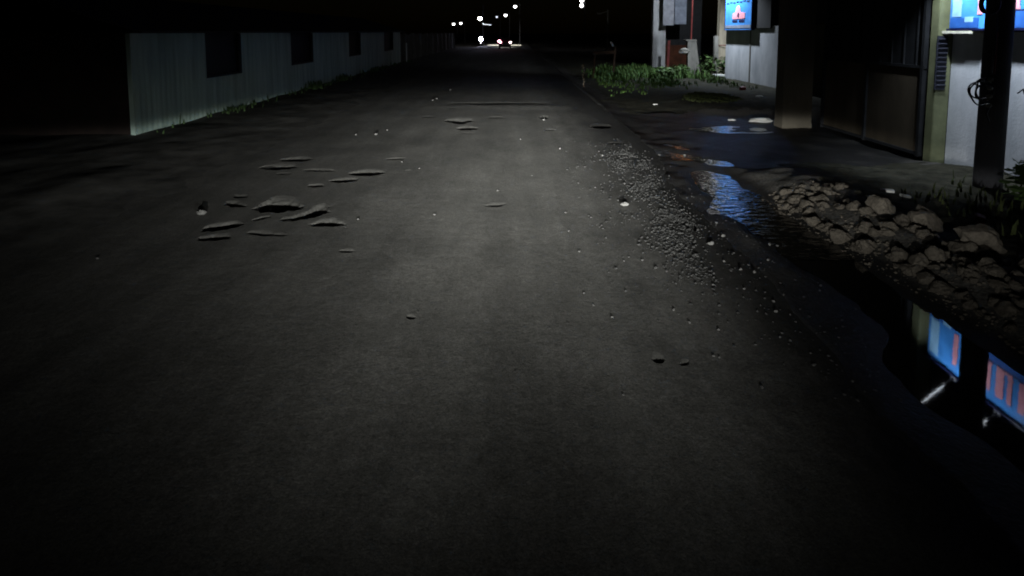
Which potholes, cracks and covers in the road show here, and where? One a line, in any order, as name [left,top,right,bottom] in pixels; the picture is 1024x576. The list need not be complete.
pothole [651,350,666,364]
pothole [246,229,288,237]
pothole [307,217,347,227]
pothole [197,233,233,241]
pothole [348,168,386,176]
pothole [251,195,306,213]
pothole [224,200,249,208]
pothole [280,202,332,221]
pothole [200,220,246,232]
